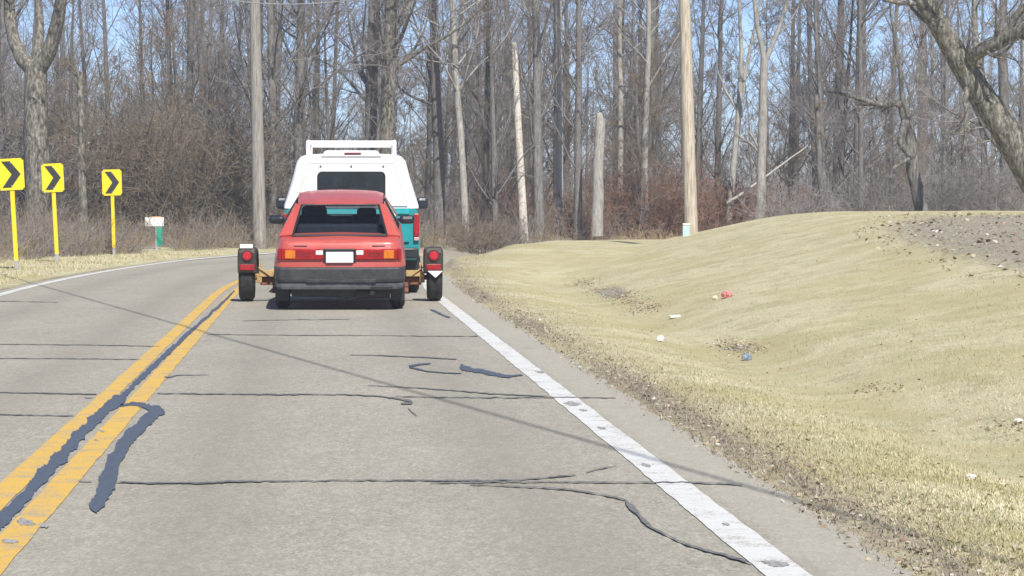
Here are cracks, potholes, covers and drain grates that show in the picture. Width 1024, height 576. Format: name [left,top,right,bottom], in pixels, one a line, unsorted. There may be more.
crack [85,465,752,564]
crack [208,319,478,336]
crack [161,374,616,416]
